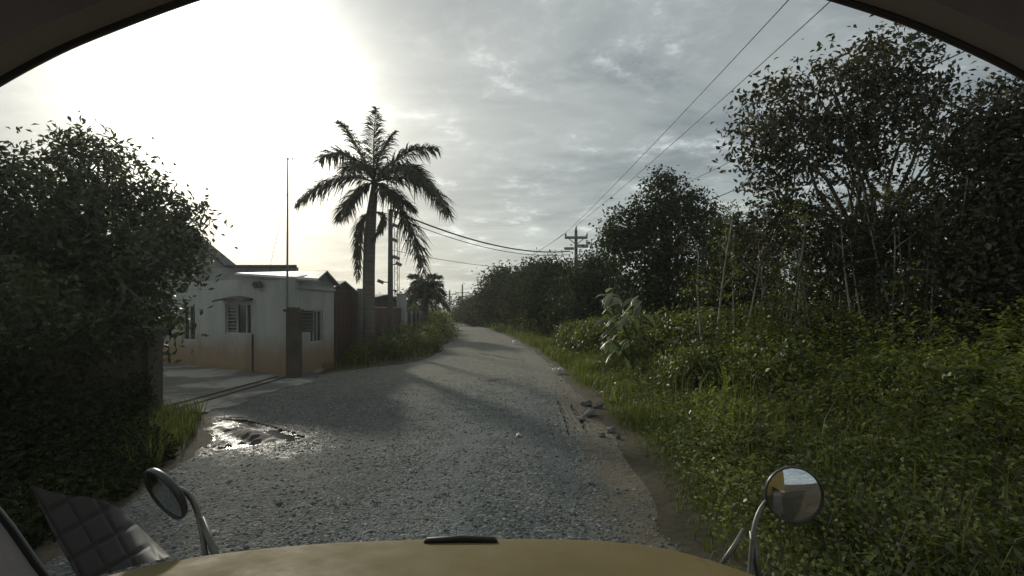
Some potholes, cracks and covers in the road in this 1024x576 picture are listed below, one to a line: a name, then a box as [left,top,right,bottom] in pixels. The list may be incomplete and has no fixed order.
crack [551,397,594,438]
pothole [202,417,318,453]
